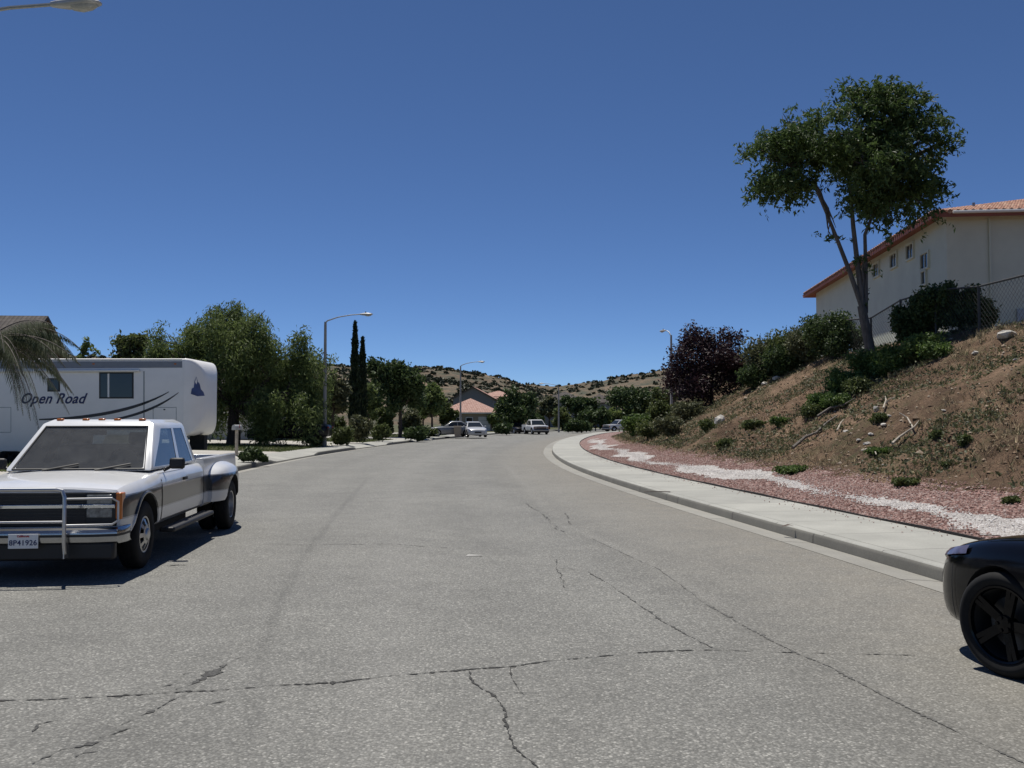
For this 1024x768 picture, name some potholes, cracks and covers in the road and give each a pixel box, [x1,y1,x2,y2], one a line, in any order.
crack [596,540,1024,763]
crack [0,504,905,768]
